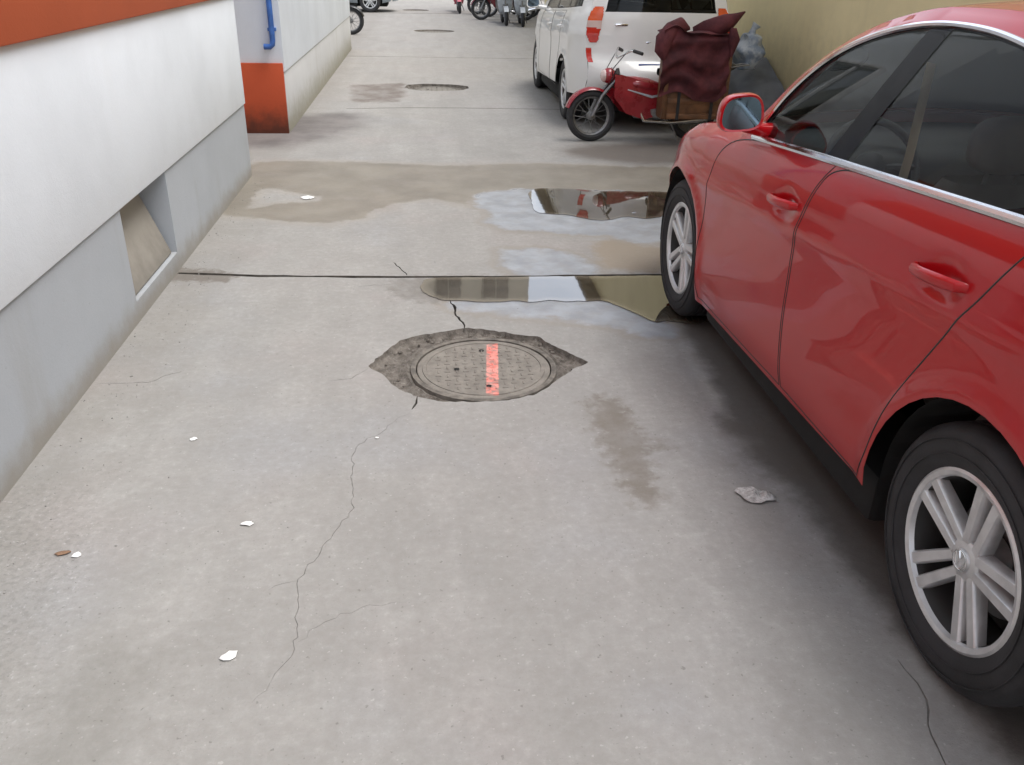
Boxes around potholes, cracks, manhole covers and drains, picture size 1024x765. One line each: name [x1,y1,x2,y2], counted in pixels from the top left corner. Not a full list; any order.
manhole cover [410,338,556,402]
crack [450,300,465,331]
crack [898,660,946,765]
crack [253,412,410,701]
